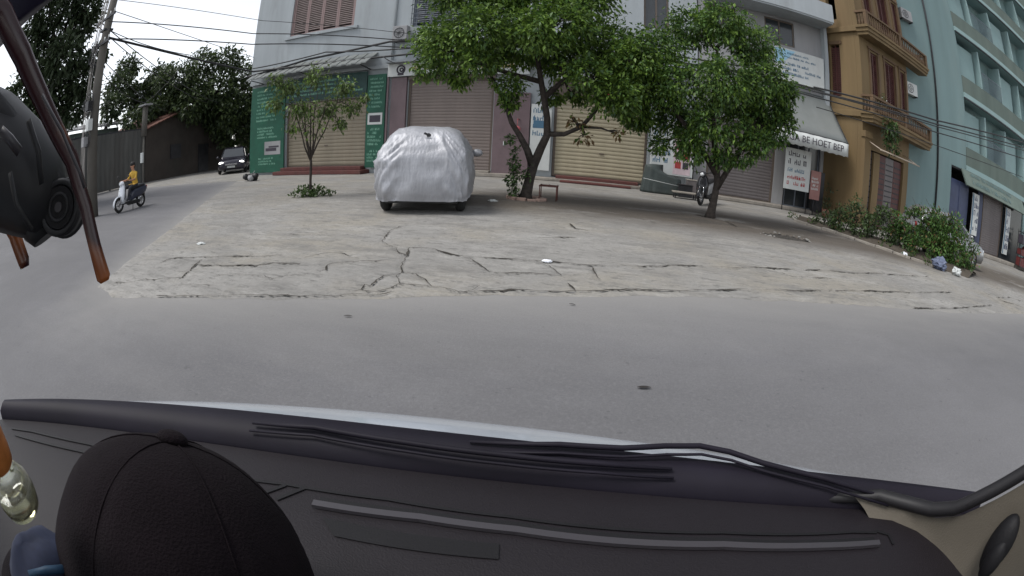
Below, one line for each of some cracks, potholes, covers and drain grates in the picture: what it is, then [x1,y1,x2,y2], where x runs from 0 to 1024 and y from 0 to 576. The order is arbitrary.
pothole [760,231,811,243]
crack [137,227,927,292]
